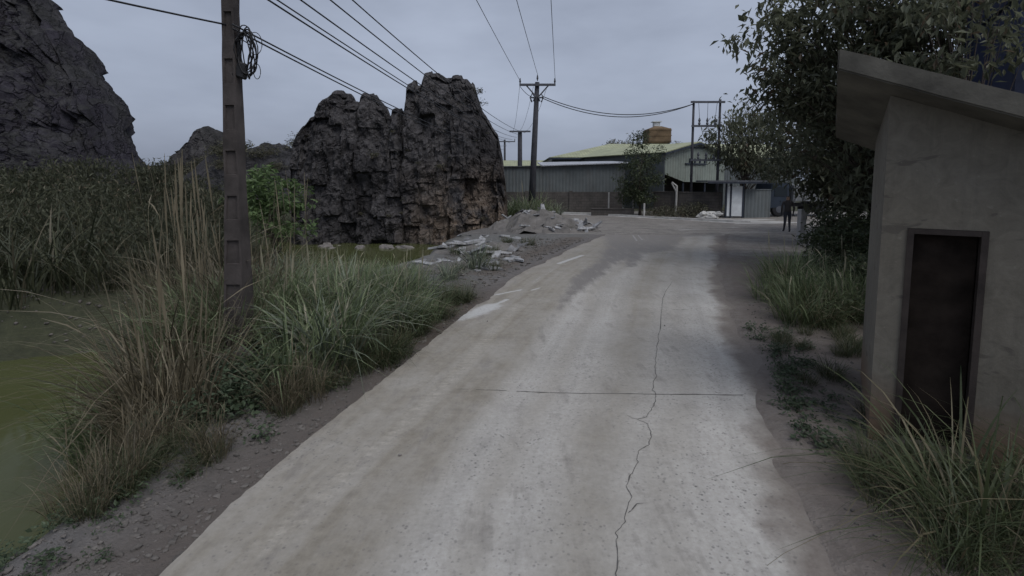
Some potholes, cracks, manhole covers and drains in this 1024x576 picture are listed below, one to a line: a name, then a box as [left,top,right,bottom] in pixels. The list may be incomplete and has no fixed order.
crack [615,284,674,576]
